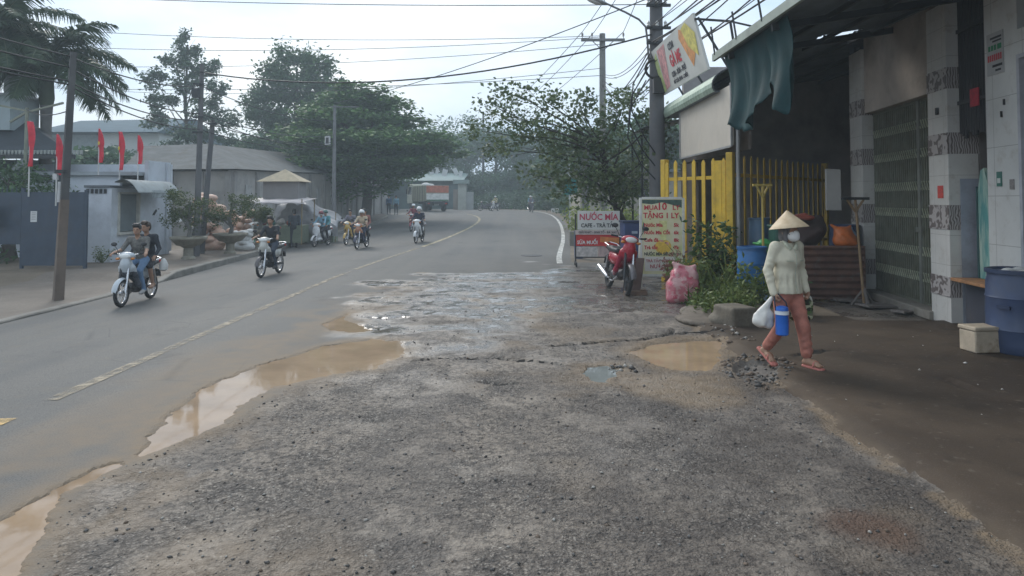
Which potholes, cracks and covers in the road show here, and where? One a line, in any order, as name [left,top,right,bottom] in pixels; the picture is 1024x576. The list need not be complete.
pothole [133,338,404,457]
pothole [0,461,125,573]
pothole [626,336,729,369]
pothole [731,358,782,384]
crack [421,328,727,365]
